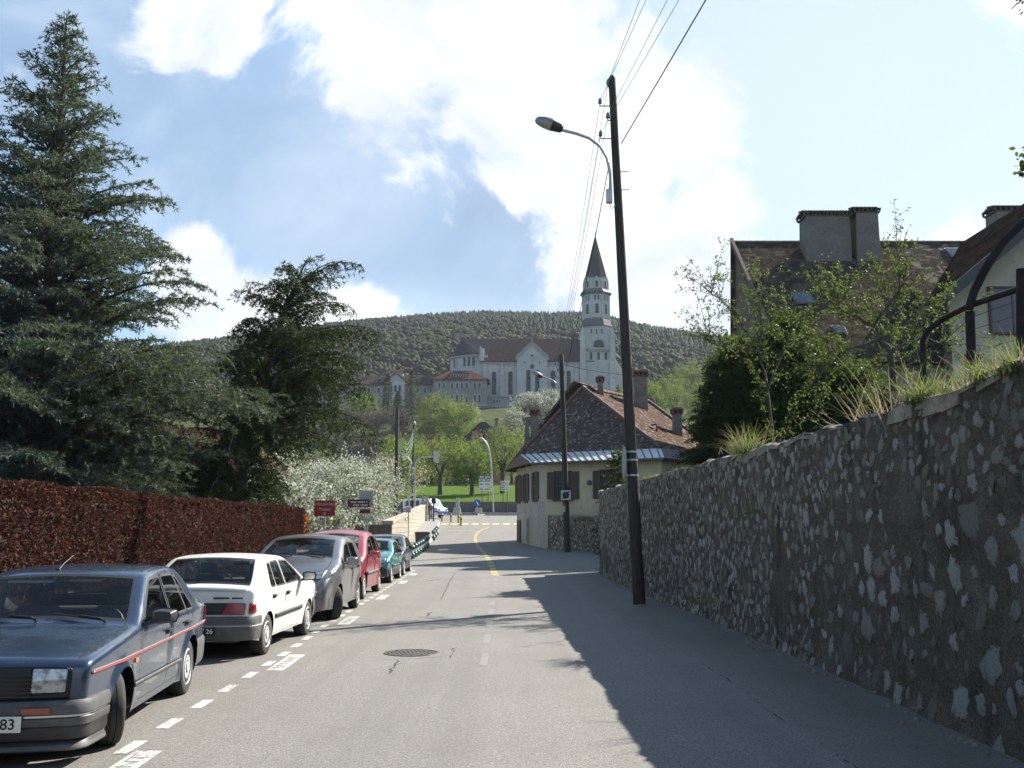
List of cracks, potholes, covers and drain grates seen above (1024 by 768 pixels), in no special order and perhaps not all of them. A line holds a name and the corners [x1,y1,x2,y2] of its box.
manhole cover [383,649,440,657]
